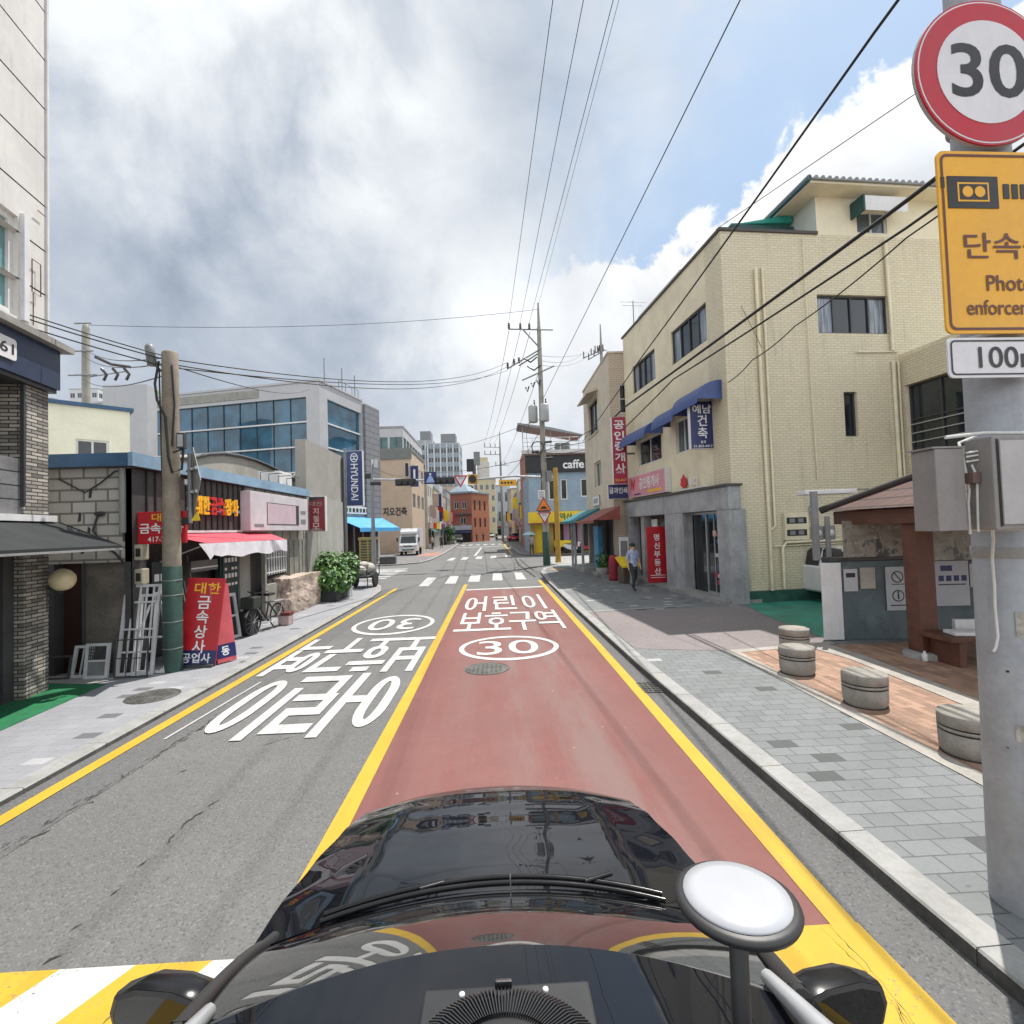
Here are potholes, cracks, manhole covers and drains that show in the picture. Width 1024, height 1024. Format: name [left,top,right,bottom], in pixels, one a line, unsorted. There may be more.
crack [1,688,257,851]
drain grate [636,682,664,693]
crack [823,920,914,1024]
manhole cover [465,662,509,675]
manhole cover [123,688,182,704]
crack [42,800,218,965]
